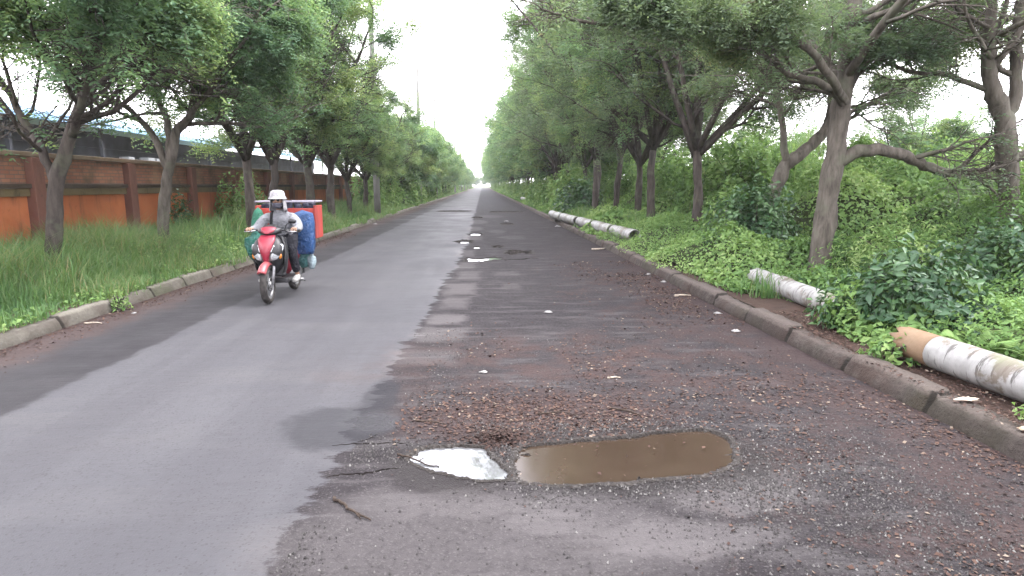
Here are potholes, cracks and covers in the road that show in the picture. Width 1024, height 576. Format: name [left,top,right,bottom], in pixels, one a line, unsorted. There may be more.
pothole [505,428,743,488]
crack [326,466,402,478]
crack [332,434,404,446]
pothole [404,443,513,482]
